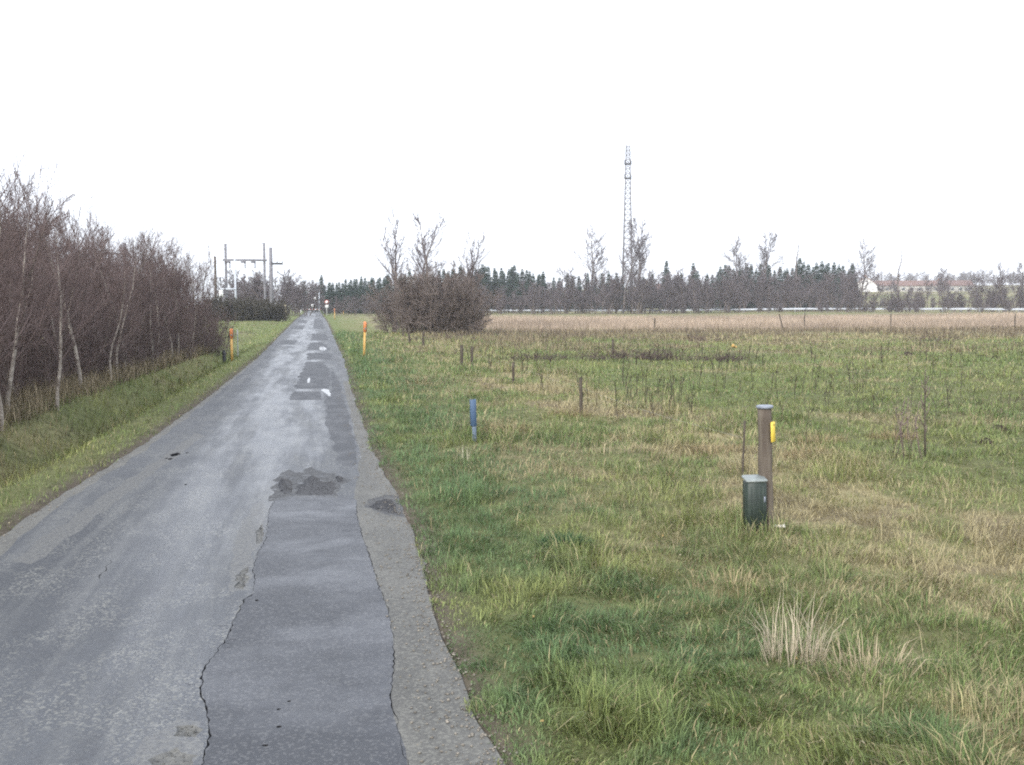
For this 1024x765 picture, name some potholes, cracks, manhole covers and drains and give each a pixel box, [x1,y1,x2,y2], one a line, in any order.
pothole [234,566,249,589]
pothole [369,499,398,514]
pothole [295,475,337,495]
crack [188,503,273,765]
pothole [278,478,293,494]
crack [356,499,409,765]
pothole [255,524,264,544]
